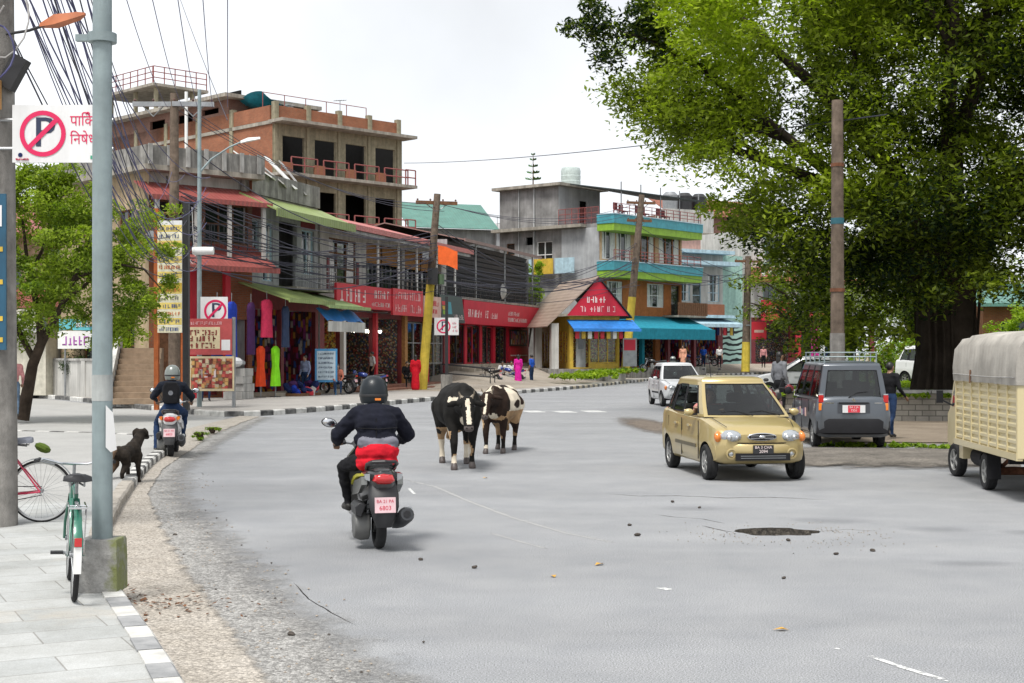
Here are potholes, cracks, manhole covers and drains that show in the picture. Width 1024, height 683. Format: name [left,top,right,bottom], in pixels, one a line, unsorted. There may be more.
pothole [735,528,820,536]
